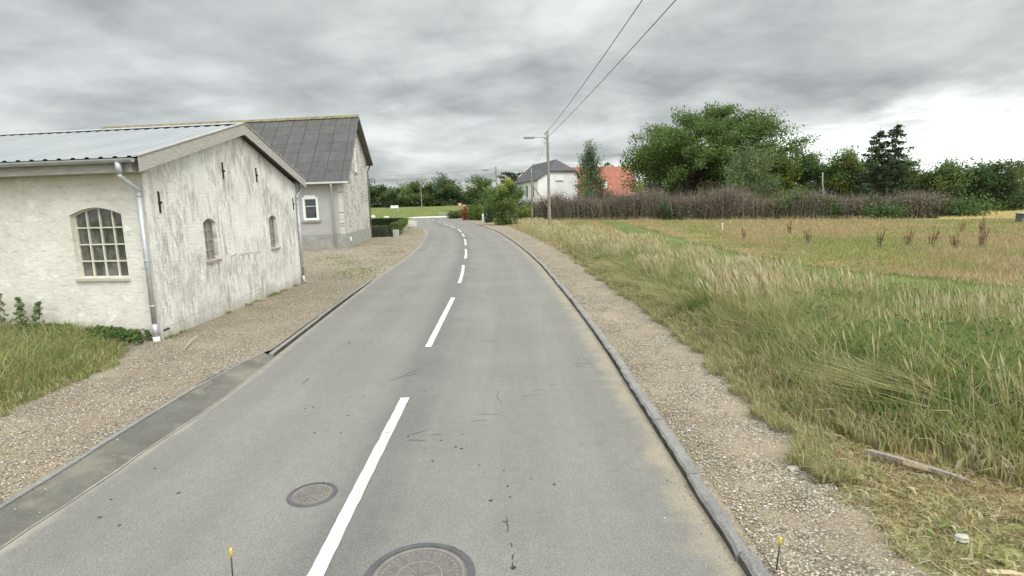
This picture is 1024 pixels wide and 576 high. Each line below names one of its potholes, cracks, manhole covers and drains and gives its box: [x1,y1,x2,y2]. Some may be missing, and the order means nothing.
manhole cover [286,482,338,507]
manhole cover [364,543,475,576]
